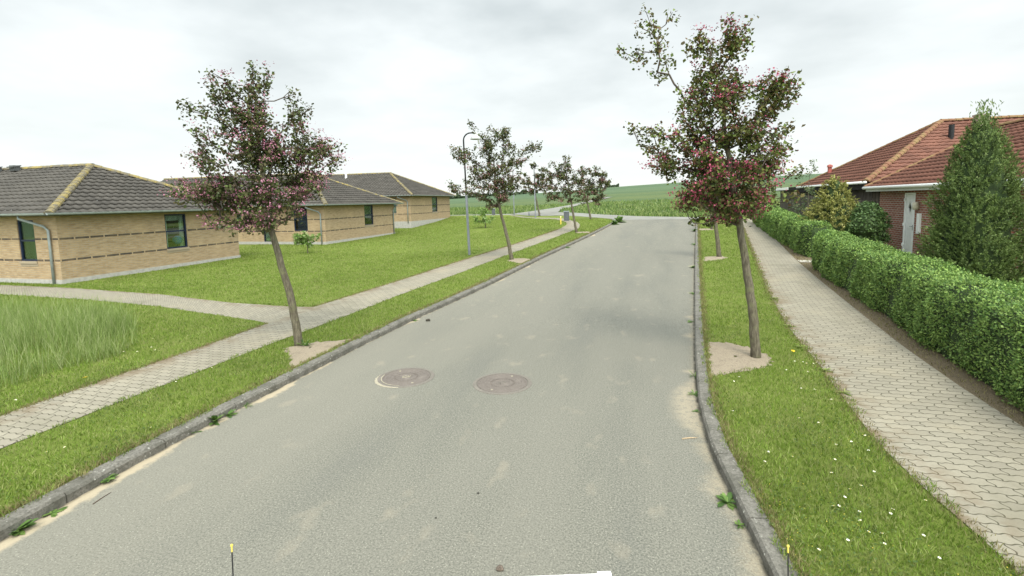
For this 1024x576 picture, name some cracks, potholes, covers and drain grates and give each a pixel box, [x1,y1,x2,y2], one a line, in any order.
manhole cover [374,368,435,388]
manhole cover [473,373,532,395]
